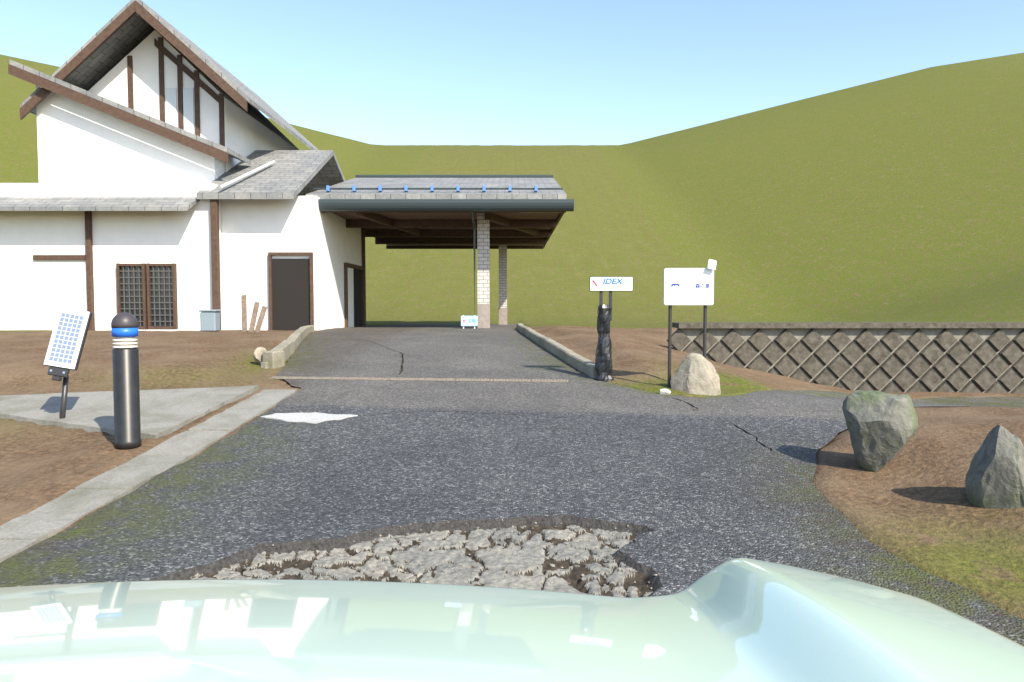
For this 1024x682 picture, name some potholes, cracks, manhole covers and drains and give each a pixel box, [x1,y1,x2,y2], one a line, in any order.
crack [347,337,404,375]
crack [723,422,776,453]
pothole [148,515,663,597]
